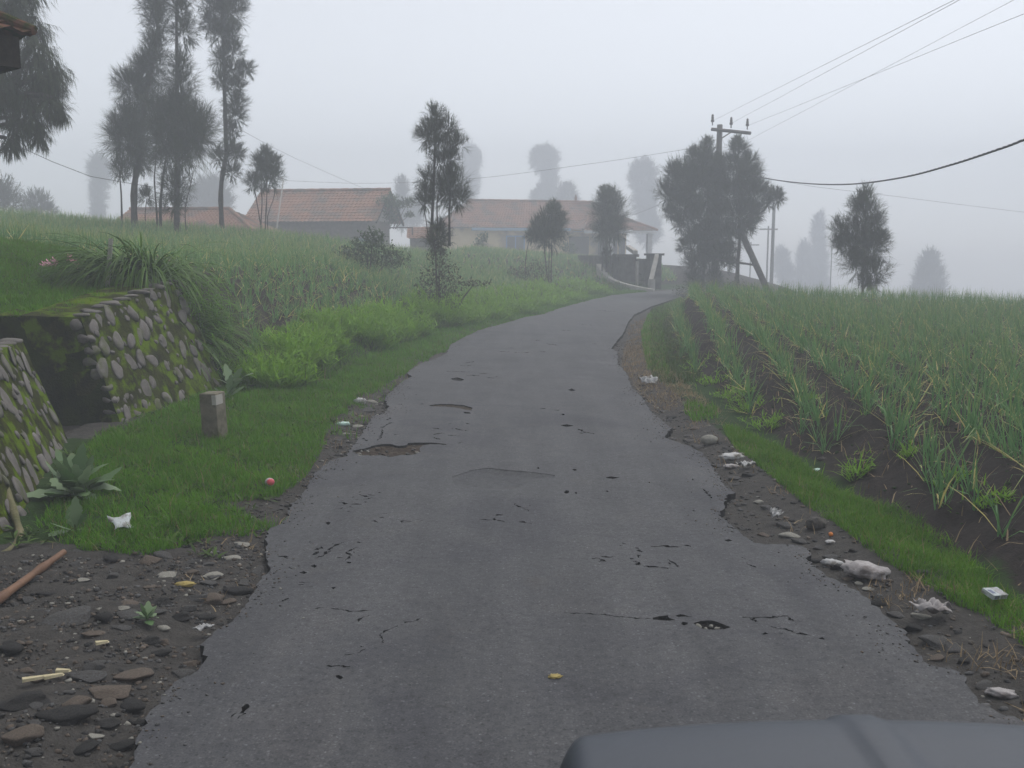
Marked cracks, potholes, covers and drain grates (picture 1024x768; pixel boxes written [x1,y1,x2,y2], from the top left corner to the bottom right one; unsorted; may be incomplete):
crack [315,607,421,668]
crack [312,542,362,563]
pothole [353,443,447,457]
crack [743,615,824,640]
crack [592,543,691,569]
pothole [694,620,730,630]
